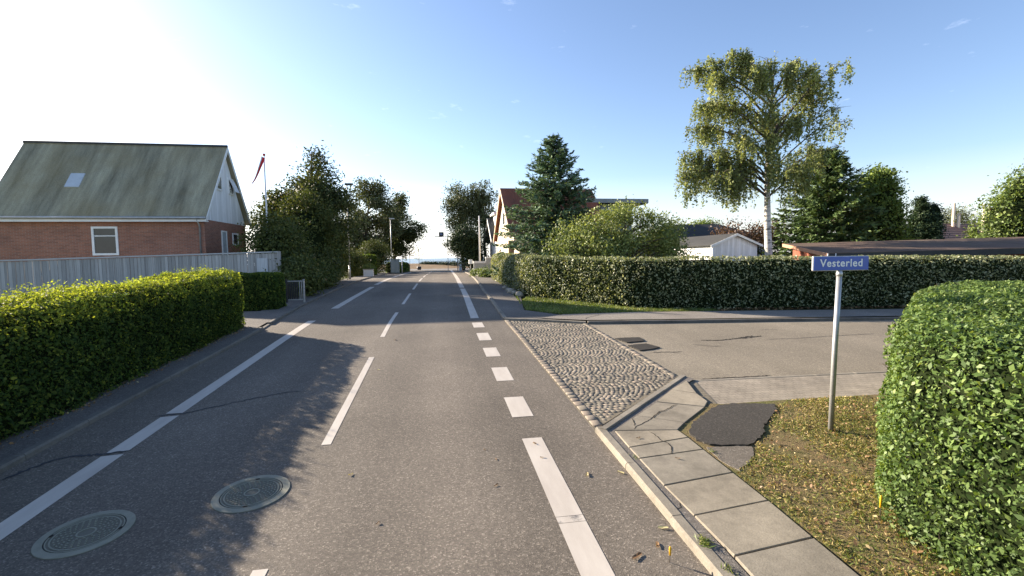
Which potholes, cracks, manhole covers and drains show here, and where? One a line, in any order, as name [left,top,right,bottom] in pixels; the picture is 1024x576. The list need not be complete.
crack [2,450,129,480]
crack [159,391,298,416]
manhole cover [30,510,137,560]
manhole cover [210,475,291,514]
crack [632,404,676,454]
